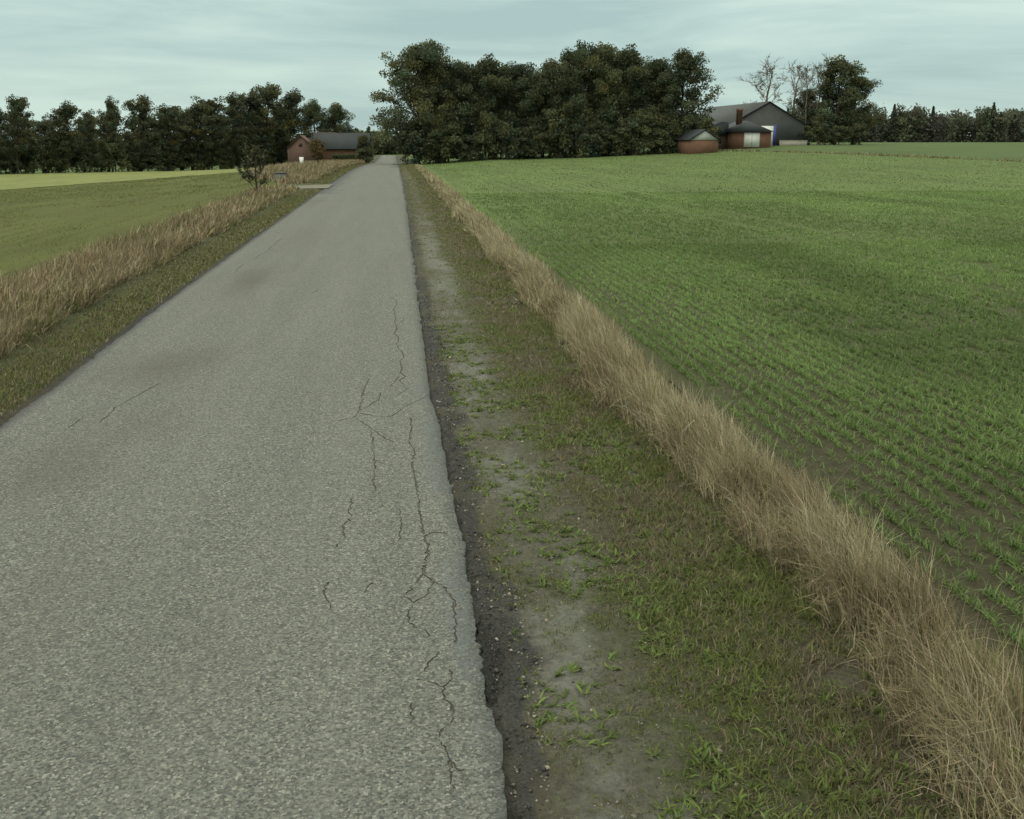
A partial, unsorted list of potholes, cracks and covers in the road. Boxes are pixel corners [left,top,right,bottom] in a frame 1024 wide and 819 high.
crack [337,294,471,790]
